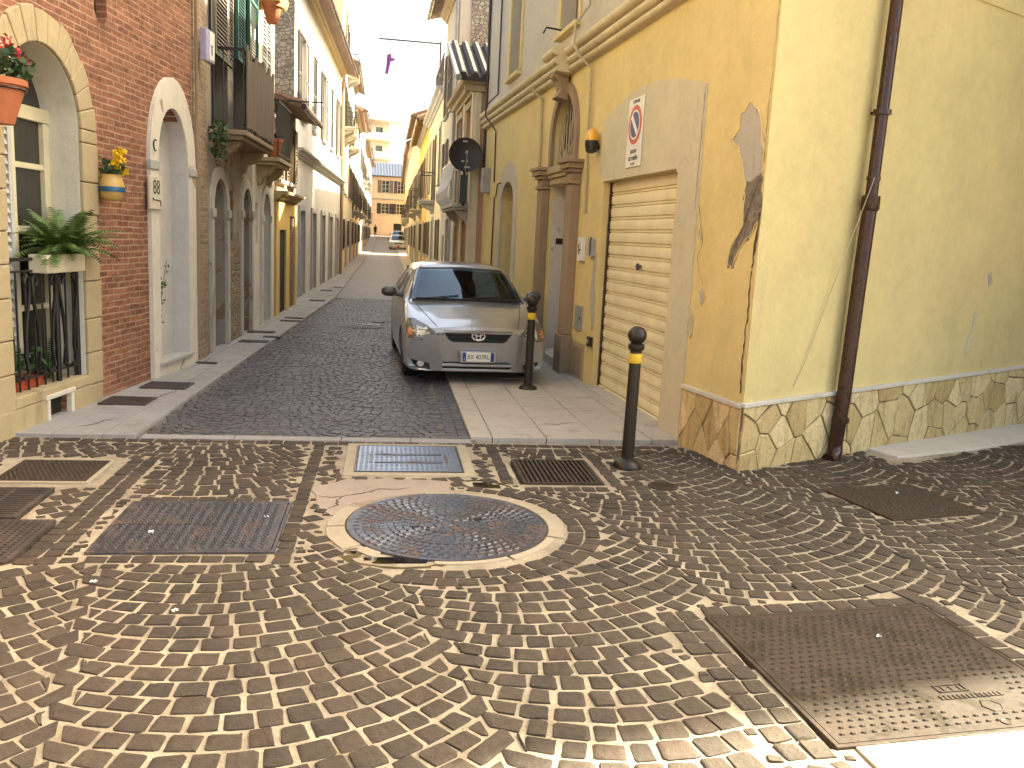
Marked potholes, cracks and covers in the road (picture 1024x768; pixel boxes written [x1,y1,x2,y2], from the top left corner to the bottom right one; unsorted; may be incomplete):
manhole cover [342,443,477,477]
drain grate [0,487,55,519]
drain grate [139,381,195,390]
drain grate [98,396,157,406]
drain grate [511,459,604,485]
crack [317,487,409,508]
manhole cover [822,483,986,521]
manhole cover [705,604,1024,751]
manhole cover [84,501,293,555]
manhole cover [326,492,563,565]
